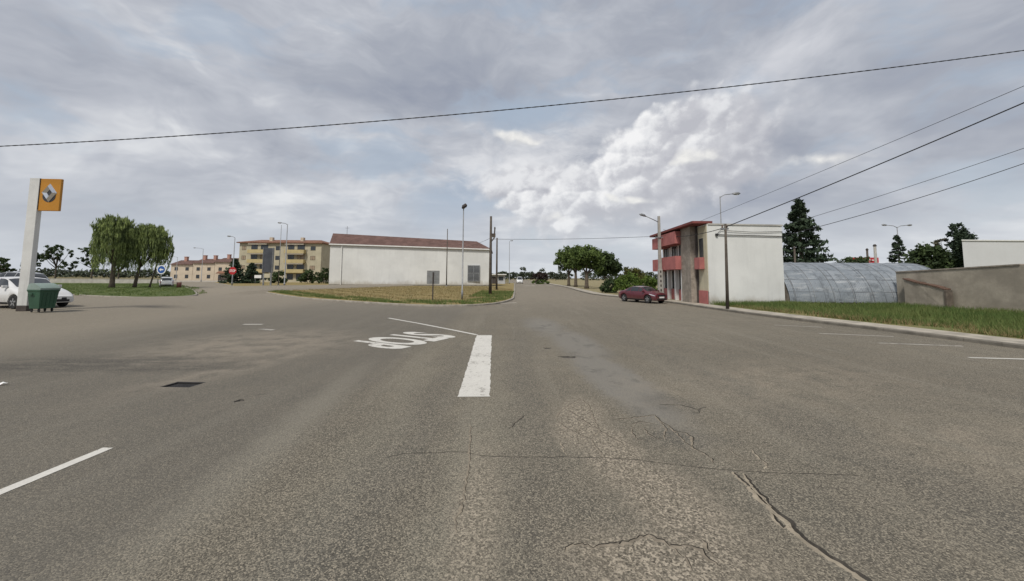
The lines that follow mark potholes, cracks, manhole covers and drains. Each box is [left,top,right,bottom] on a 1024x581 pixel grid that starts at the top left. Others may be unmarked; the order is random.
crack [384,399,872,581]
